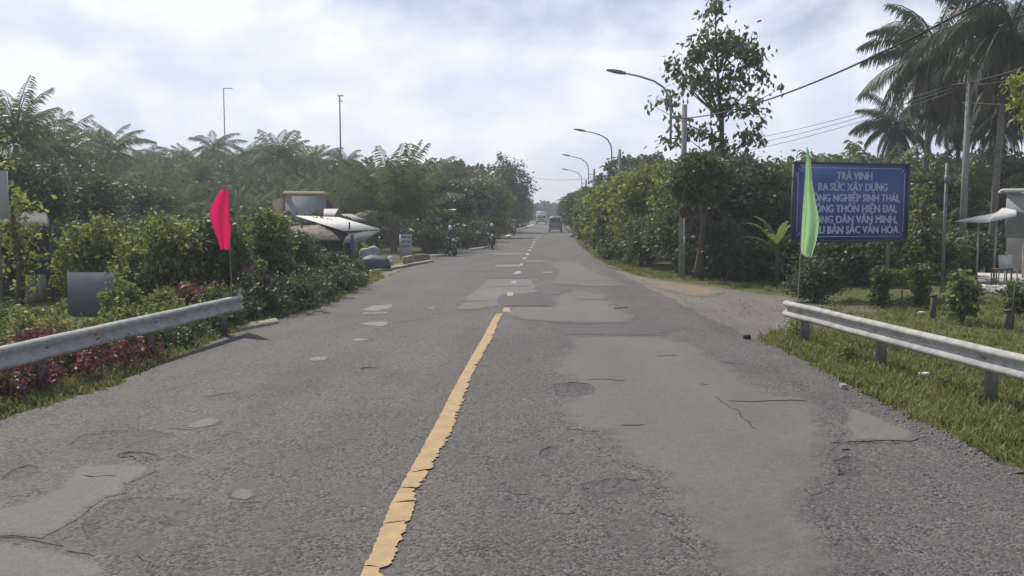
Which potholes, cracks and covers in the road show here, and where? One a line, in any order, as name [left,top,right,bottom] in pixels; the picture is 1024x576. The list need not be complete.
pothole [115,451,161,462]
pothole [539,446,559,458]
crack [705,384,800,429]
crack [0,537,94,557]
pothole [1,464,39,481]
pothole [581,477,647,498]
pothole [553,382,596,397]
